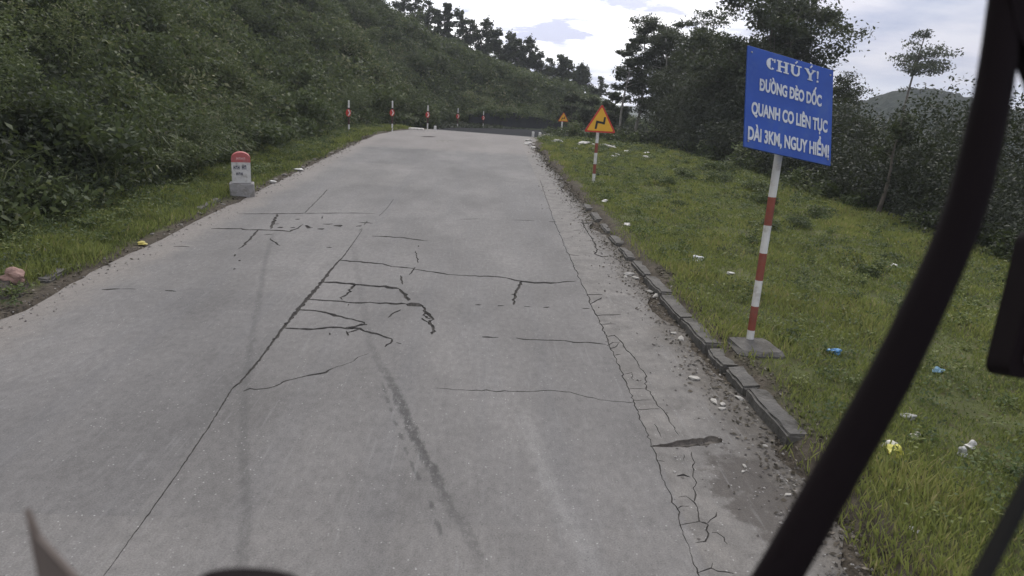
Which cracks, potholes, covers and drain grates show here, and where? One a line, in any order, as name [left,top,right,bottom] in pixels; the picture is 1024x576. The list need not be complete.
crack [211,181,734,576]
pothole [650,436,722,449]
